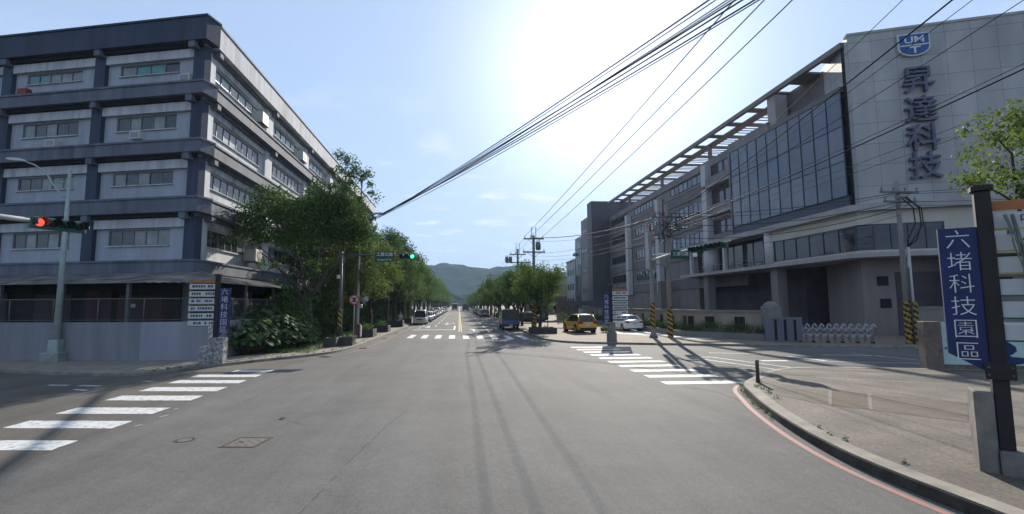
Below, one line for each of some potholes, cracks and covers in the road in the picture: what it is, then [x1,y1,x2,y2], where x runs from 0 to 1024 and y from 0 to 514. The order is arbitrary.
crack [298,410,407,514]
manhole cover [218,437,274,448]
